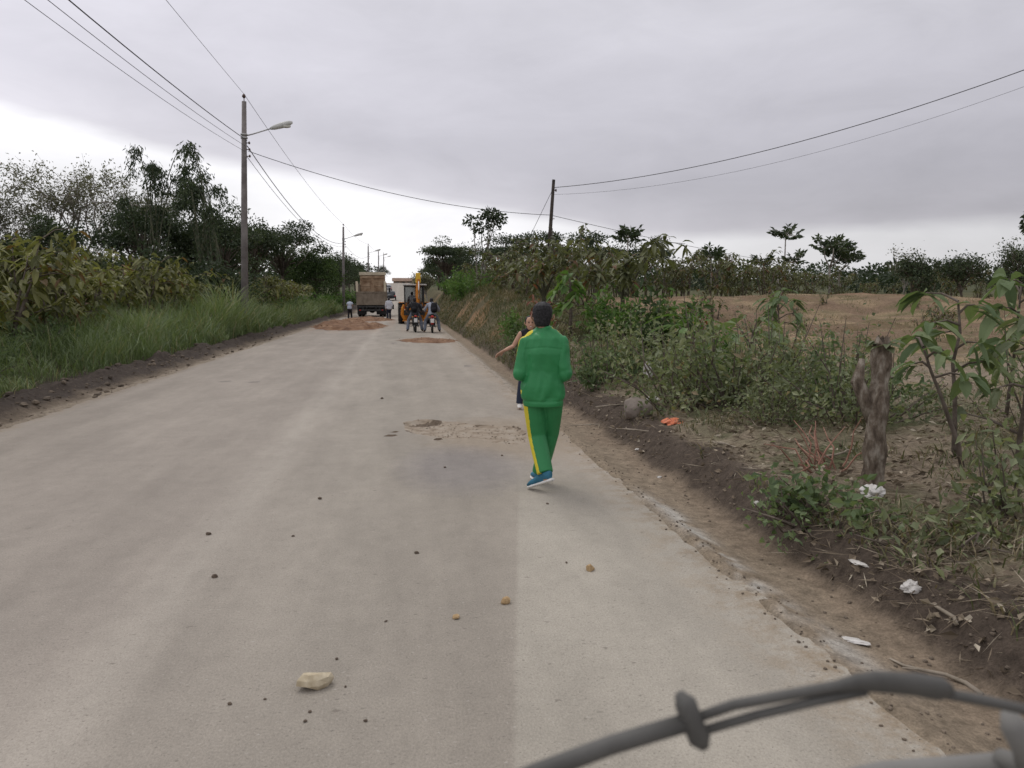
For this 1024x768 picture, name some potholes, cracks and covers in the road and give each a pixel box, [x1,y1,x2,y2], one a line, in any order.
pothole [403,419,527,444]
